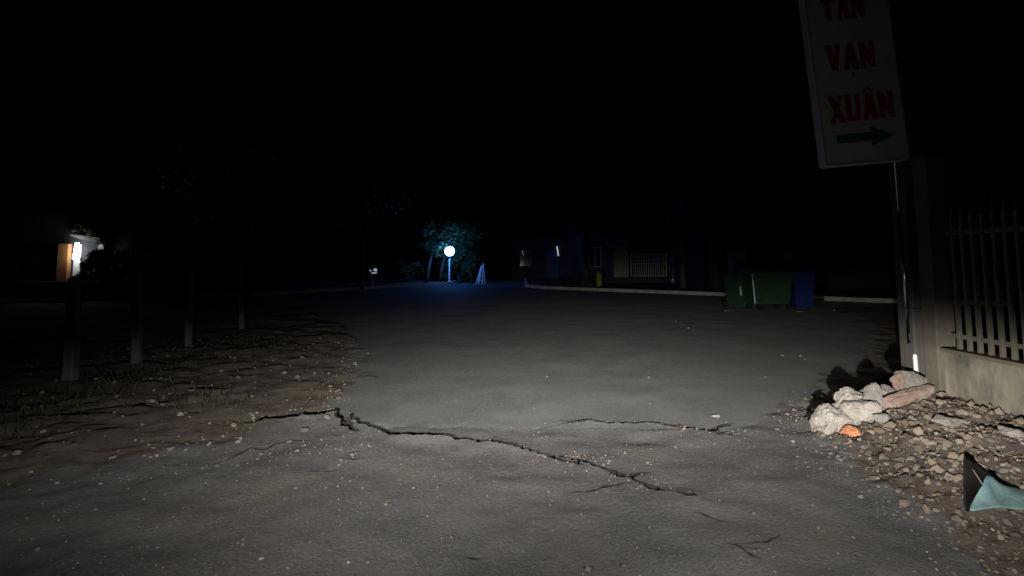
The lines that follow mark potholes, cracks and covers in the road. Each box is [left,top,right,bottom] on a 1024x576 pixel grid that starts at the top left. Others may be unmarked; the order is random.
crack [728,535,780,560]
crack [306,412,736,522]
crack [211,439,309,465]
